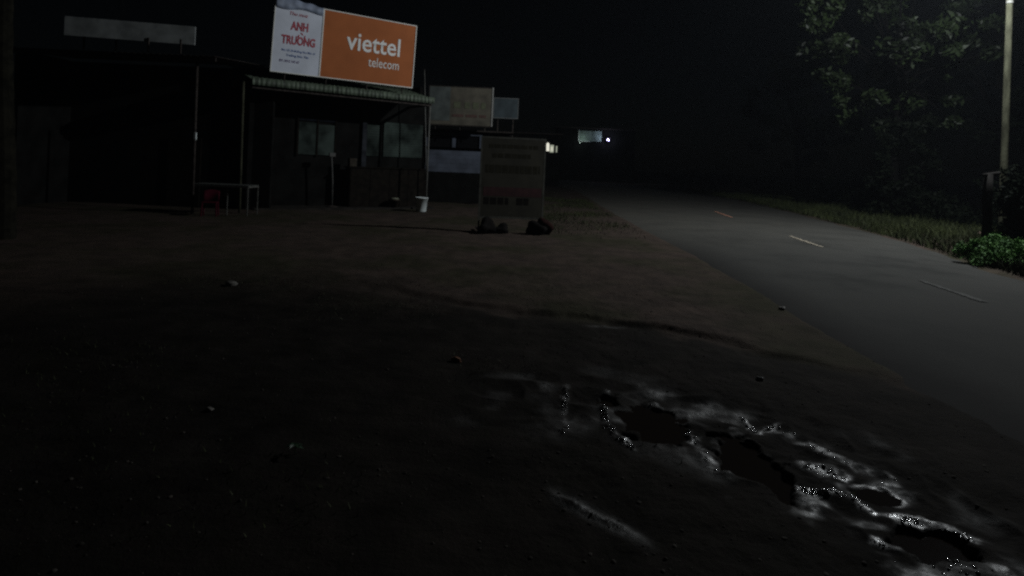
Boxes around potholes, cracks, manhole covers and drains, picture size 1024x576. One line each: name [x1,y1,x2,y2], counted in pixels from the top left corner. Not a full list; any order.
pothole [878,524,993,566]
pothole [589,391,695,451]
pothole [844,487,903,507]
pothole [689,429,811,512]
